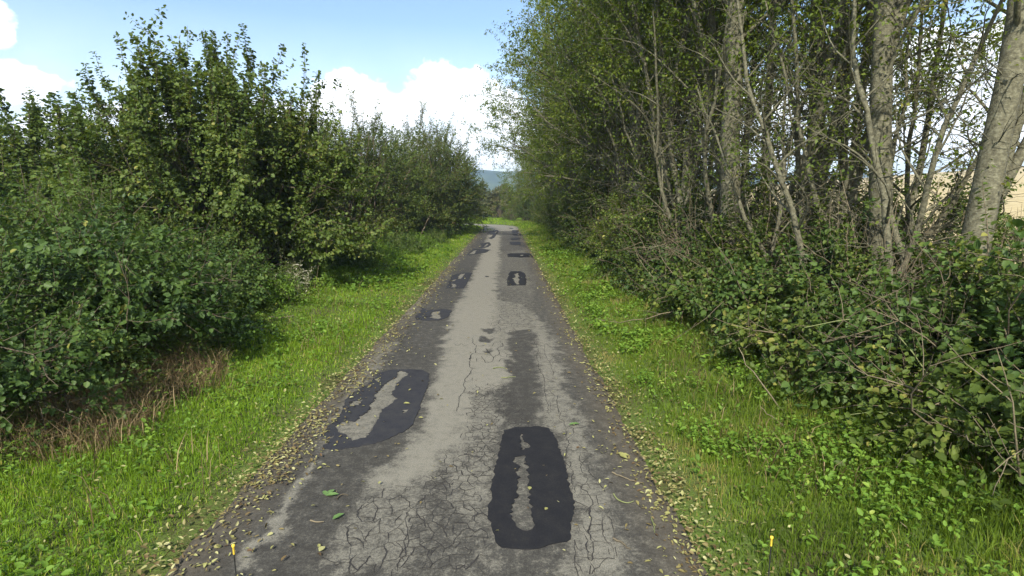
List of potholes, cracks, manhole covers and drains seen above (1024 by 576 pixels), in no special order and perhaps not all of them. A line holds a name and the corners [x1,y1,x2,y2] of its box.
crack [555,411,617,576]
crack [322,292,538,576]
